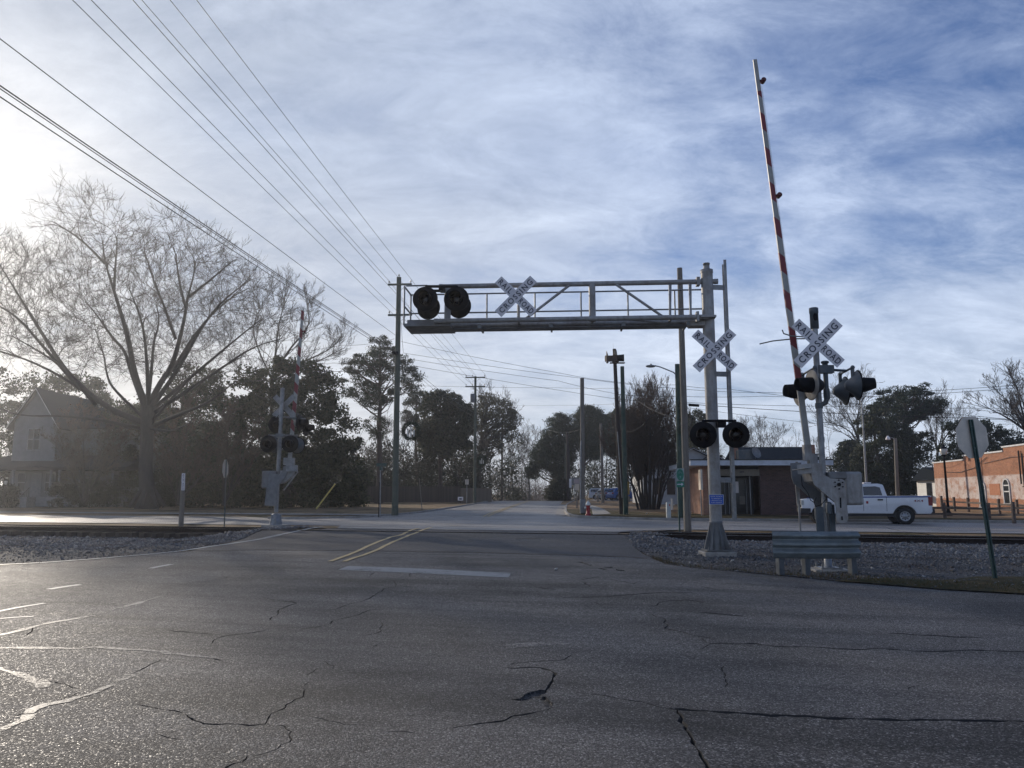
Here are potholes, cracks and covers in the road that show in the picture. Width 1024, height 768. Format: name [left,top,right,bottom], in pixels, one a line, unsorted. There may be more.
crack [312,715,420,734]
crack [140,661,364,756]
crack [301,572,421,646]
crack [453,655,571,728]
crack [652,587,1024,652]
pothole [511,689,554,708]
crack [170,598,297,661]
